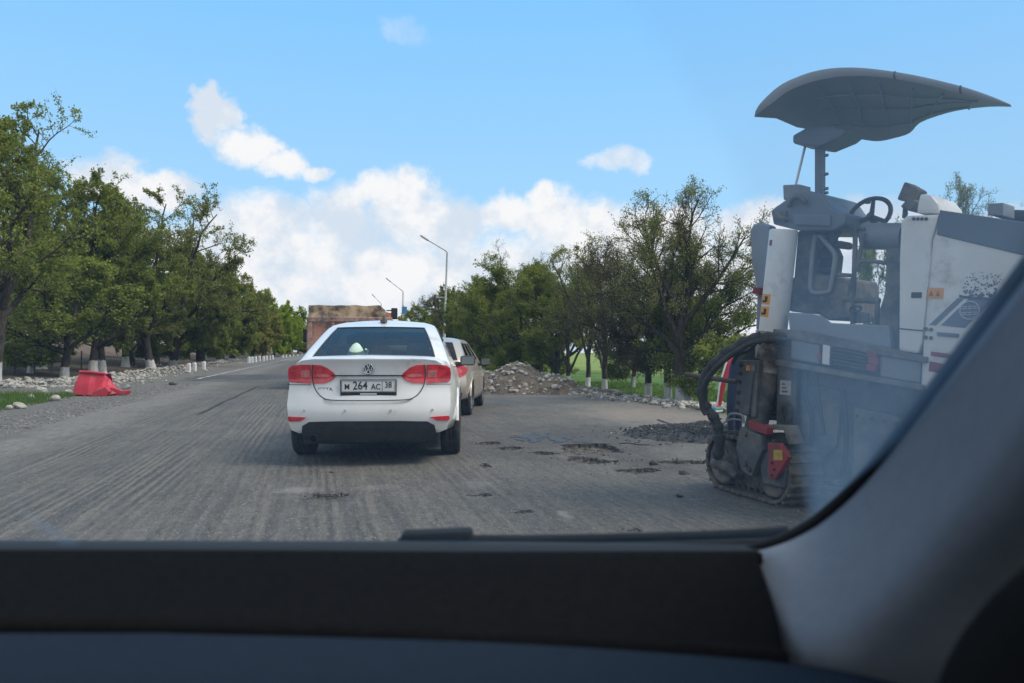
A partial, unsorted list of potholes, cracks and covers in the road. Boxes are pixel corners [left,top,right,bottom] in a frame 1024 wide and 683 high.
pothole [298,491,355,501]
pothole [557,456,643,465]
pothole [512,441,645,458]
